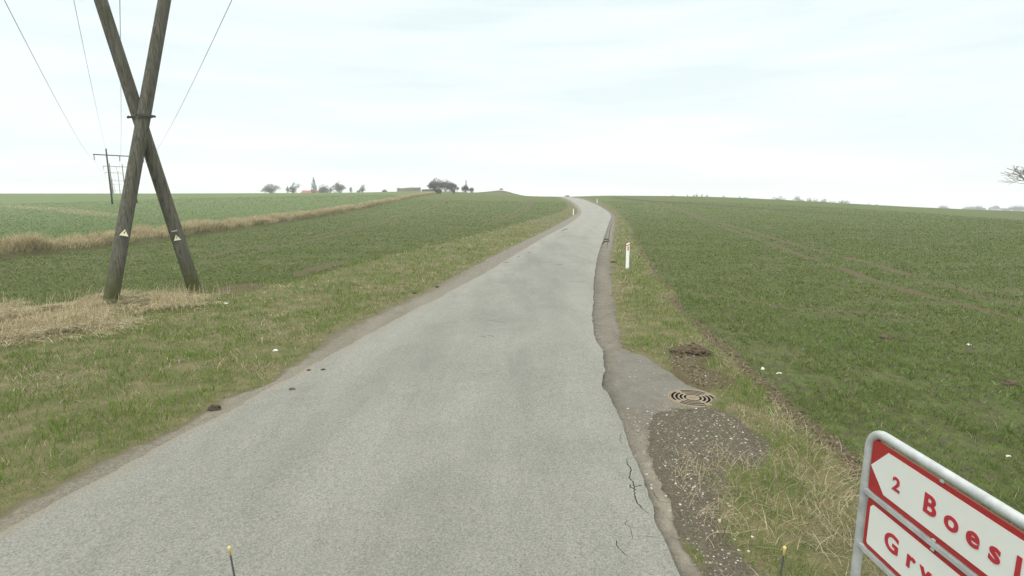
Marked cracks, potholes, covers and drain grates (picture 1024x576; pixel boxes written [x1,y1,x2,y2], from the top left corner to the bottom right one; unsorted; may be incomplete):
crack [616,459,668,552]
